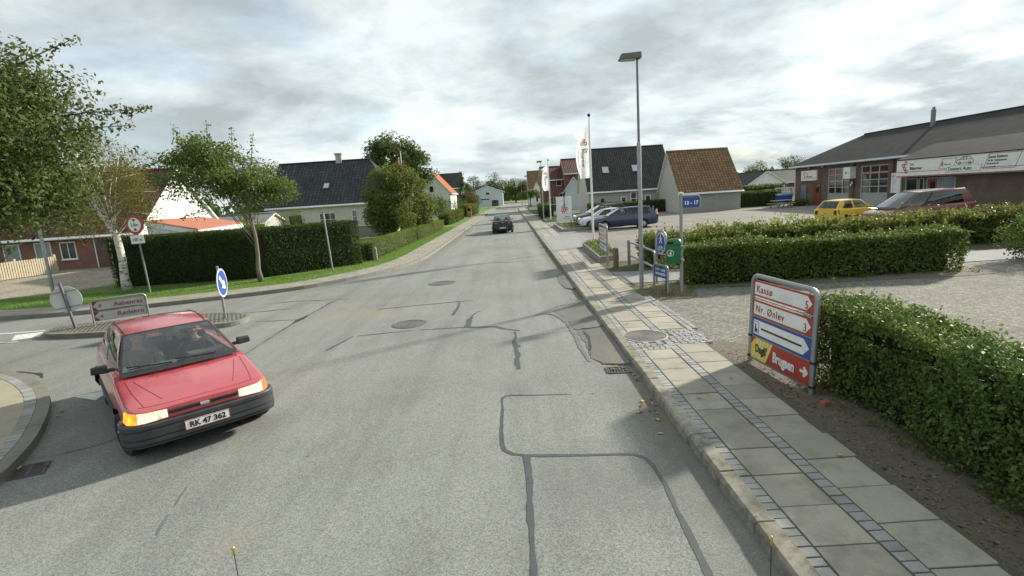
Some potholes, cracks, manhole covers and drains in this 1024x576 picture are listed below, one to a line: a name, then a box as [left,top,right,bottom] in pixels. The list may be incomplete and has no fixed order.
crack [512,330,592,369]
crack [156,485,188,535]
manhole cover [623,330,668,343]
drain grate [6,460,52,482]
drain grate [604,366,628,374]
manhole cover [392,320,427,329]
